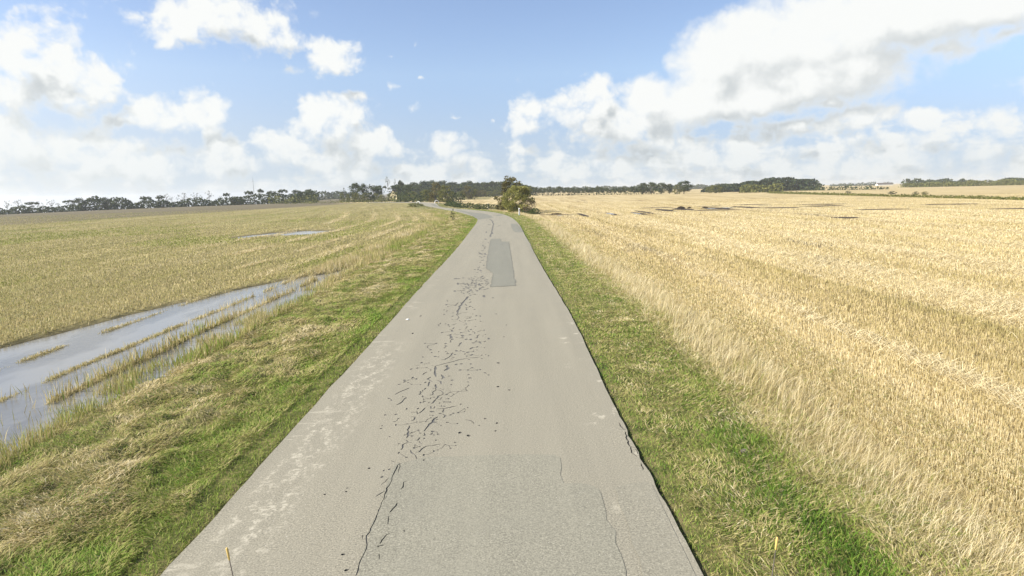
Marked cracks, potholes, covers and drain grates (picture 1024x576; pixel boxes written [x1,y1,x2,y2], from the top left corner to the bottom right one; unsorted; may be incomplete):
crack [619,423,644,469]
crack [356,219,504,575]
